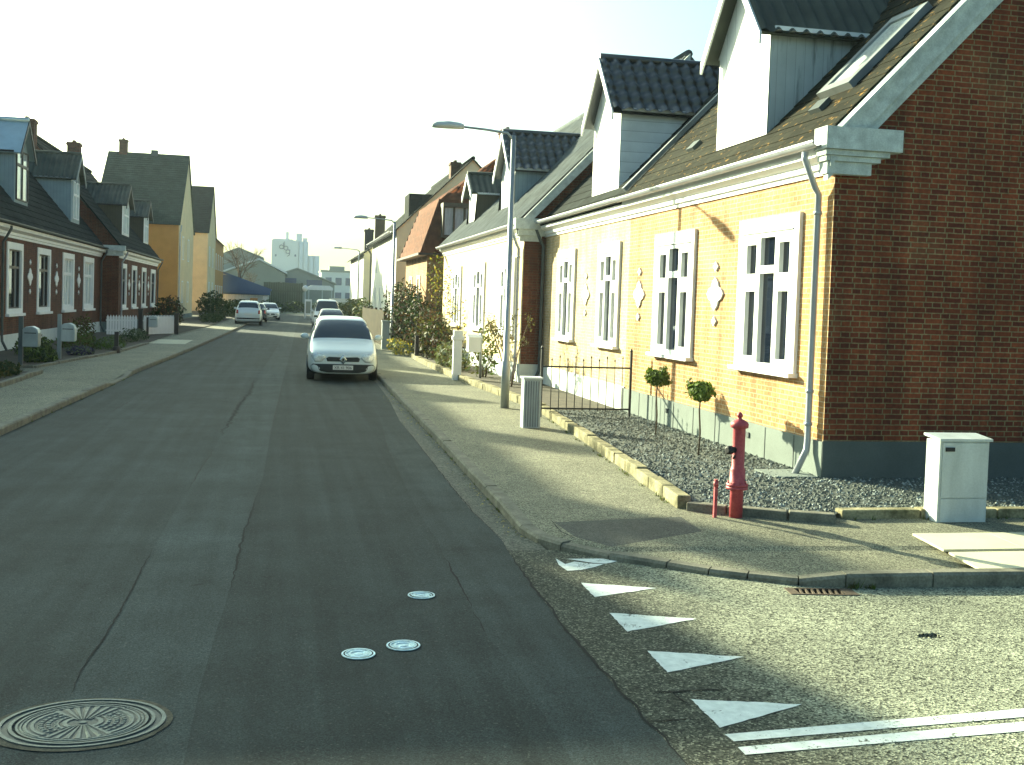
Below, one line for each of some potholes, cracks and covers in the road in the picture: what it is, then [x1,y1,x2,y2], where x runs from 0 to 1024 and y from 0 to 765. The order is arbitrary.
manhole cover [340,648,376,660]
manhole cover [0,698,173,752]
manhole cover [385,640,421,651]
manhole cover [407,591,436,599]
crack [448,561,487,634]
drain grate [784,587,860,596]
crack [69,550,152,698]
